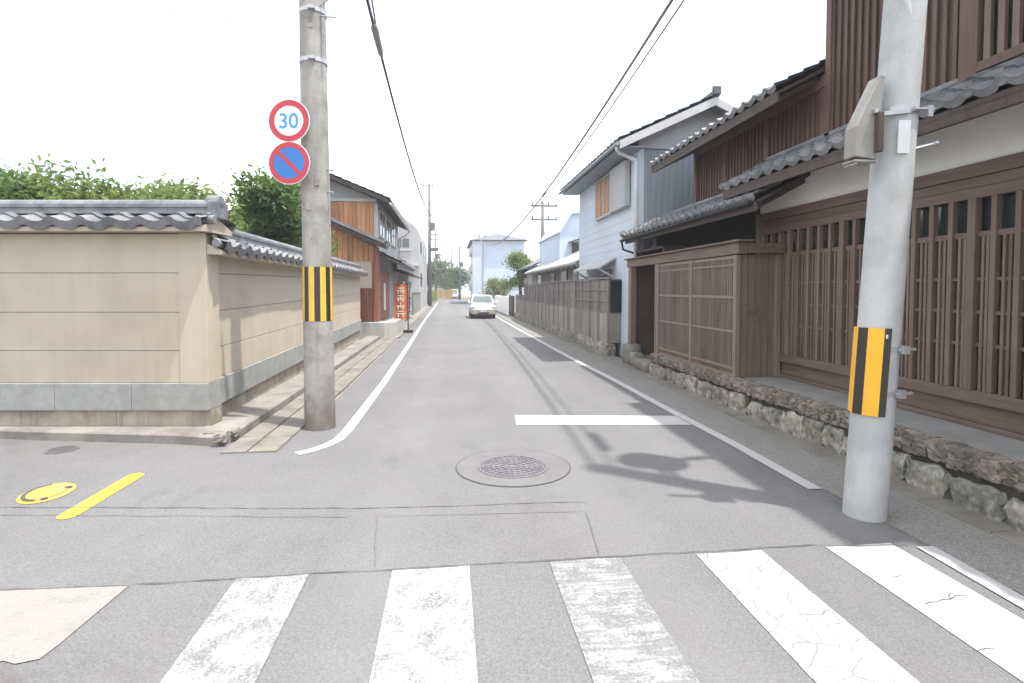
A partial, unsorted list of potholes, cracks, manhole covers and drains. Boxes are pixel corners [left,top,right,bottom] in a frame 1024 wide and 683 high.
manhole cover [44,445,80,454]
manhole cover [456,449,571,487]
